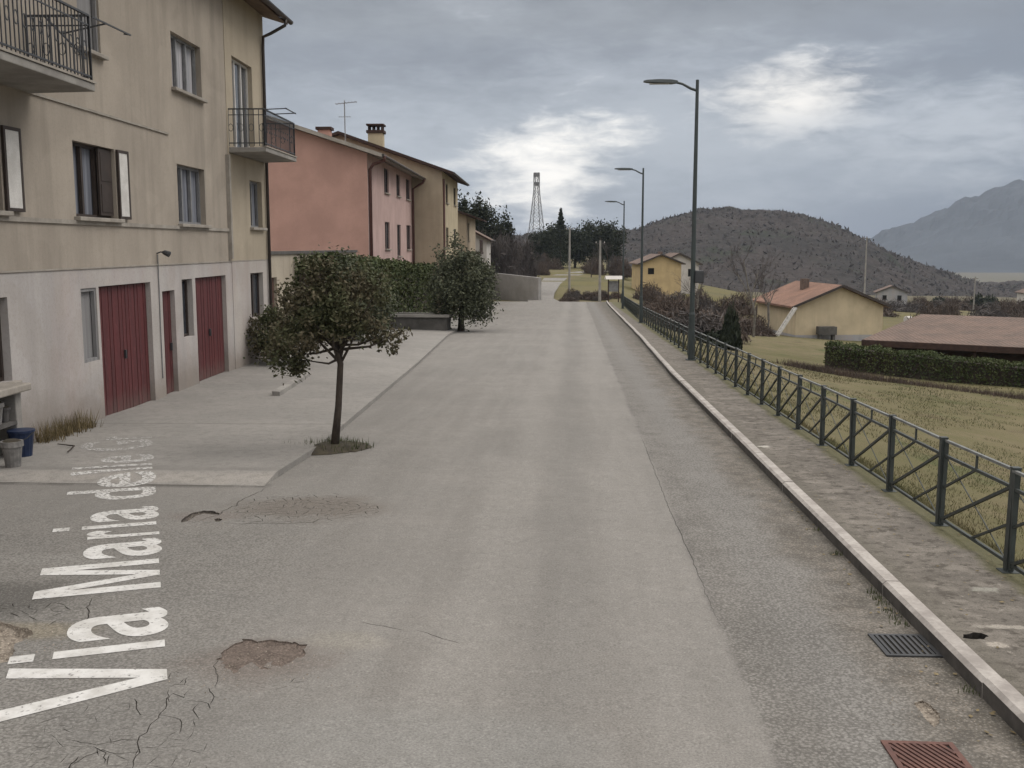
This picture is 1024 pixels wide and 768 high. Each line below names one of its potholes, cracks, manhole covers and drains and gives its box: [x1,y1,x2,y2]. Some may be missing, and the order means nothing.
pothole [0,622,33,663]
drain grate [868,633,943,658]
drain grate [880,740,973,768]
pothole [914,700,941,727]
pothole [181,511,219,522]
crack [21,658,311,768]
crack [0,598,92,625]
pothole [216,639,307,674]
